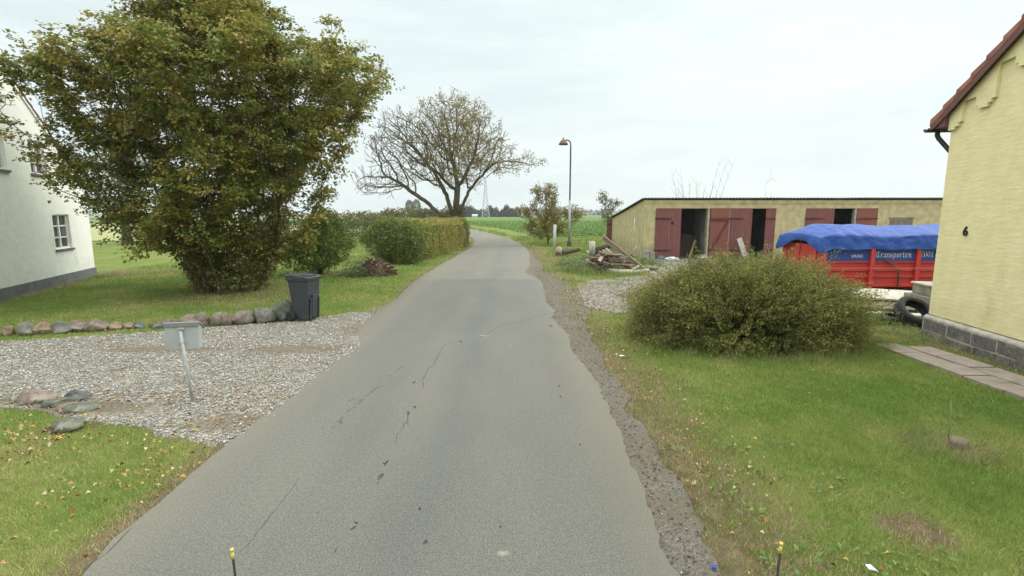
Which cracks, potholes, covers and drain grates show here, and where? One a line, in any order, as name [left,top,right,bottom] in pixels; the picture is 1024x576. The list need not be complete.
crack [321,366,404,431]
